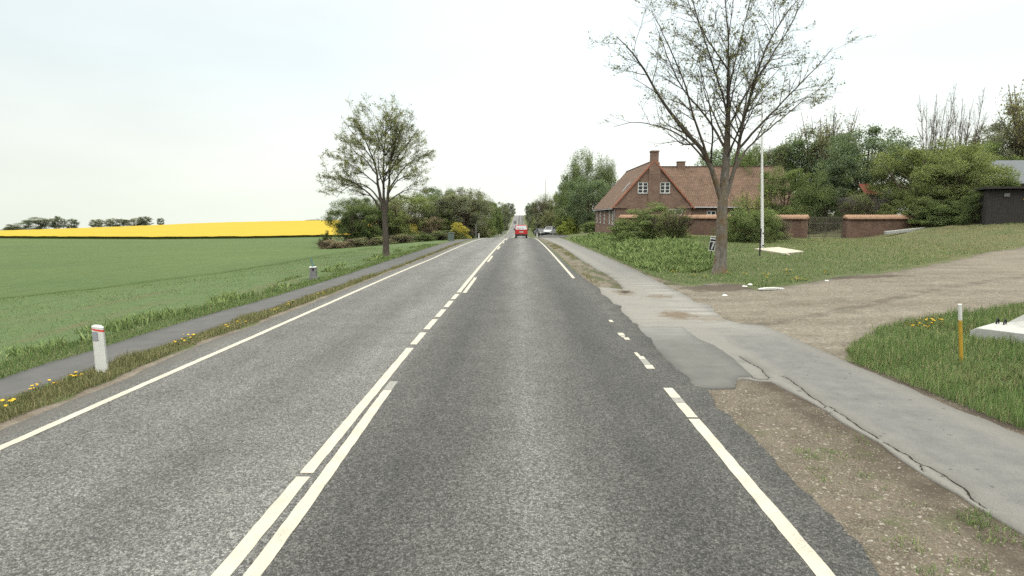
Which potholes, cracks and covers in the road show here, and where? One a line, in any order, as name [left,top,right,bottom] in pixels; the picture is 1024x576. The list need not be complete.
crack [739,356,988,510]
